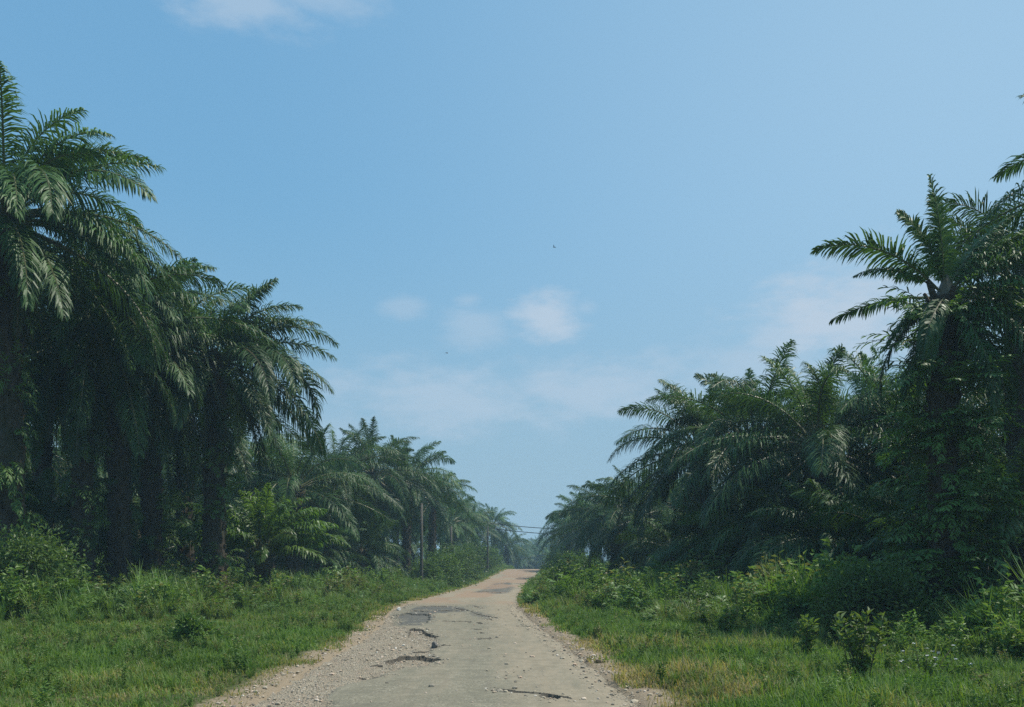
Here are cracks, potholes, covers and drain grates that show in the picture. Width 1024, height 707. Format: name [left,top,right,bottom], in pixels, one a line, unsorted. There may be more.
crack [496,688,573,699]
pothole [383,655,441,669]
